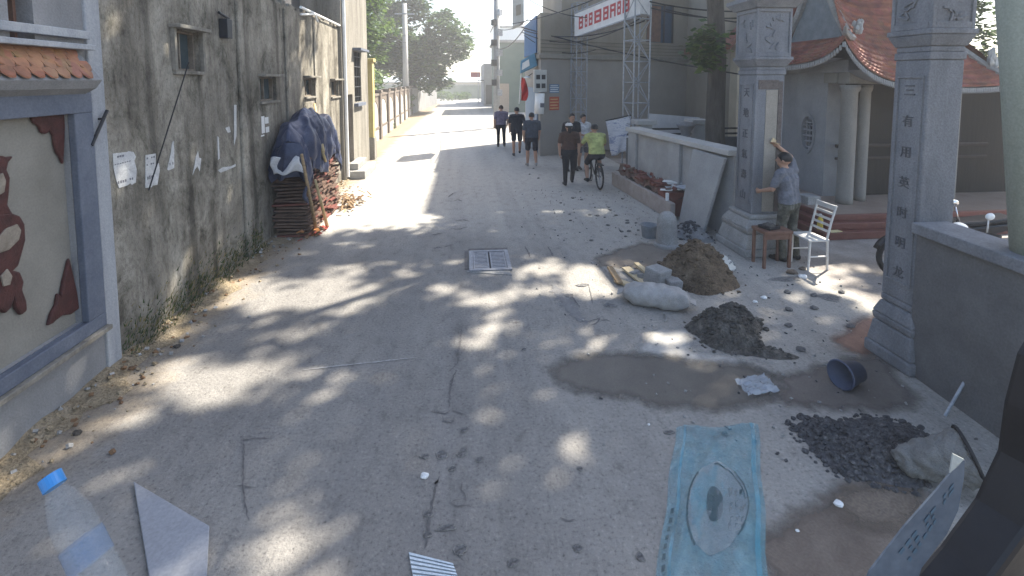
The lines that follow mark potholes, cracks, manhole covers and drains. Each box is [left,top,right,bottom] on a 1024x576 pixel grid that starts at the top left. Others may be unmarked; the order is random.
crack [431,326,465,423]
crack [424,476,474,549]
crack [234,437,268,519]
